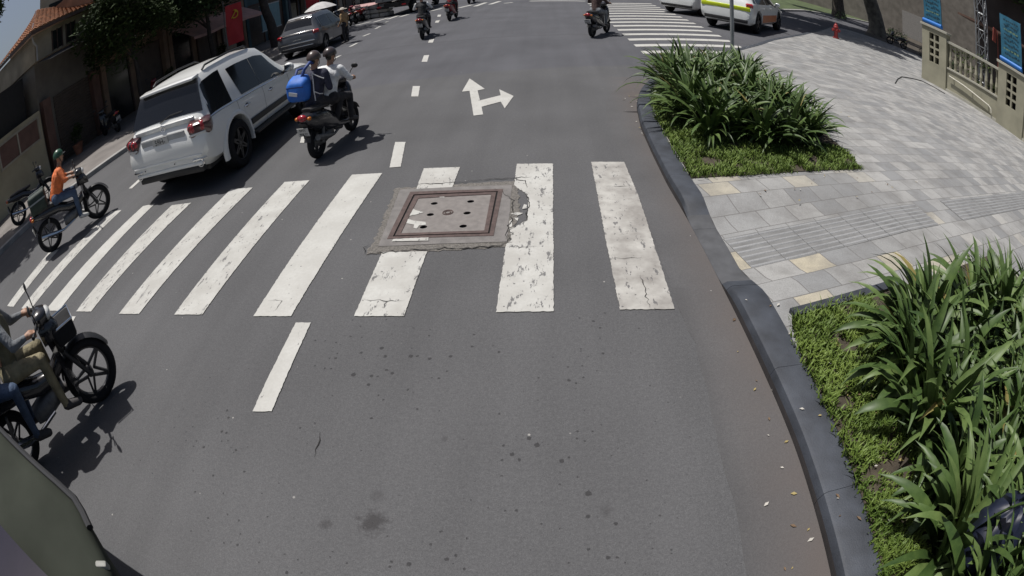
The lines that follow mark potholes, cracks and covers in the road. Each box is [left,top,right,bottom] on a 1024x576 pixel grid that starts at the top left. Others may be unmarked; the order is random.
manhole cover [366,181,520,255]
